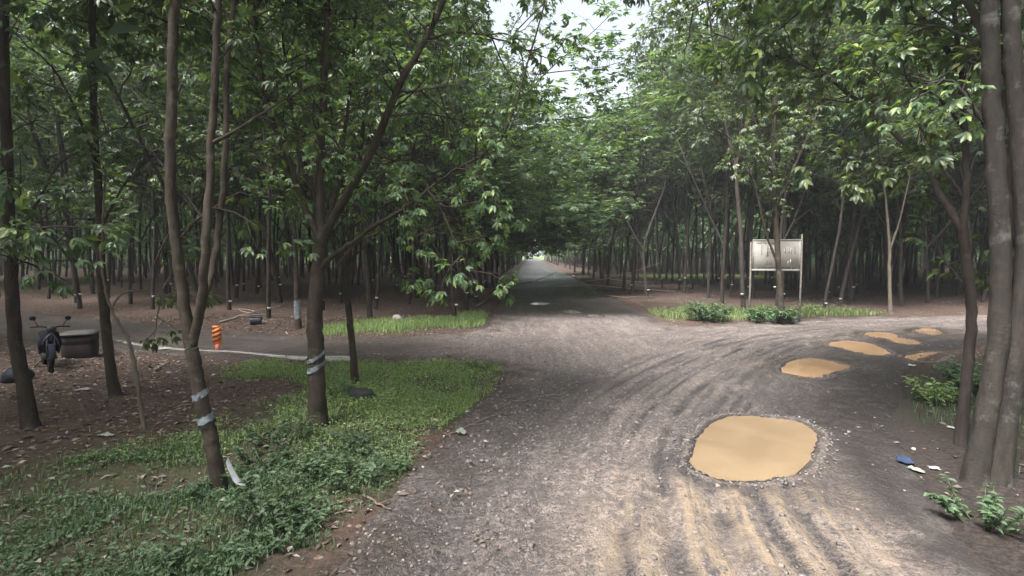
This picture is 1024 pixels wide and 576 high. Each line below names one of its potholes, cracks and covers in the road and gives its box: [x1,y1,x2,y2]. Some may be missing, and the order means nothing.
pothole [892,350,958,362]
pothole [905,327,950,336]
pothole [771,356,865,380]
pothole [818,339,902,356]
pothole [857,330,928,345]
pothole [666,409,843,492]
